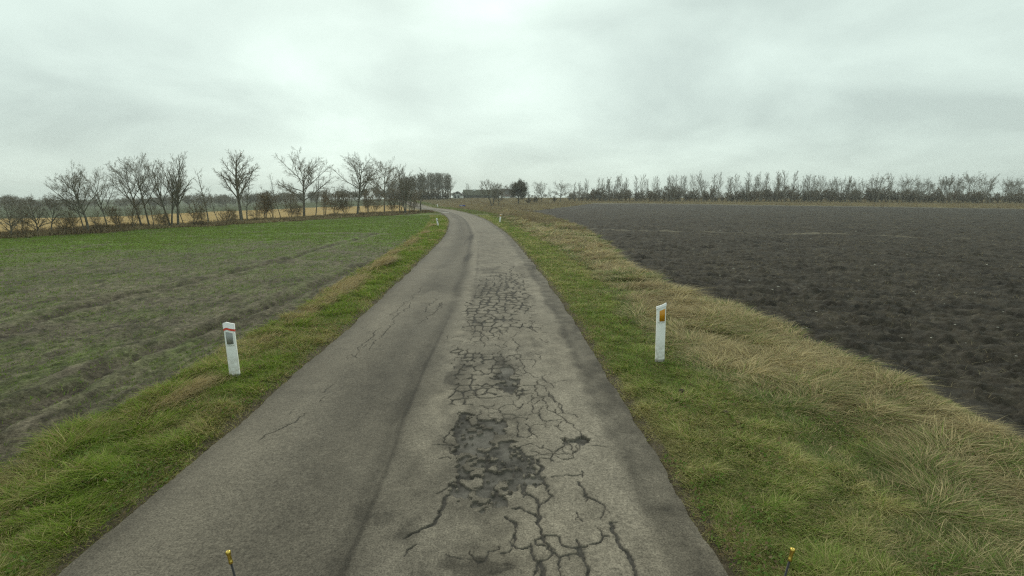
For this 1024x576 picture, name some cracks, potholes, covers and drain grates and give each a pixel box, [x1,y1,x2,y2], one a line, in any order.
crack [403,261,638,576]
pothole [494,366,526,394]
pothole [448,412,546,514]
pothole [562,435,590,446]
crack [346,287,443,360]
crack [258,384,334,442]
